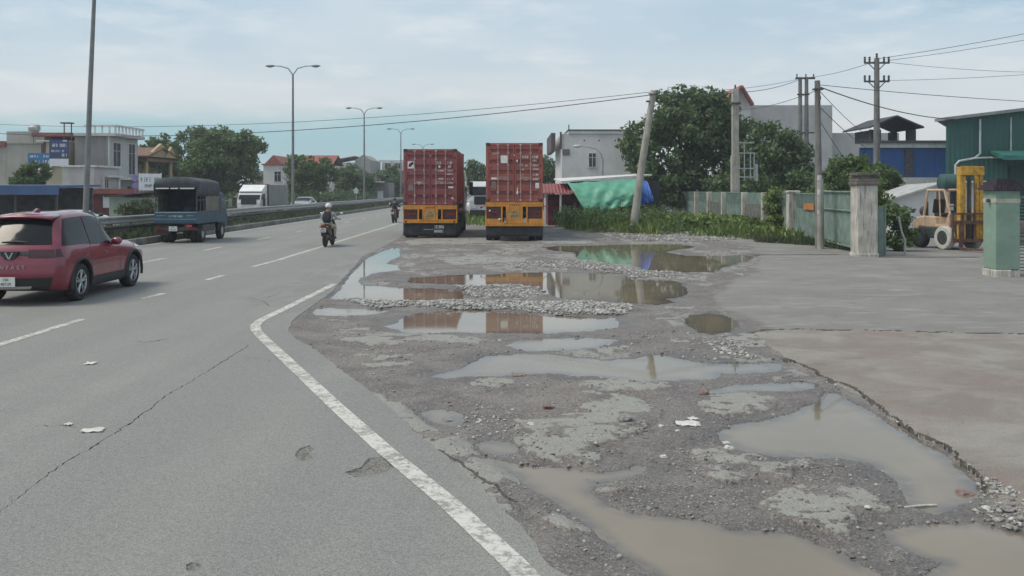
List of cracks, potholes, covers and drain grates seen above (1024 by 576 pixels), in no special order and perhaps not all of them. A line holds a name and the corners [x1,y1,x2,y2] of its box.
pothole [327,246,471,300]
pothole [422,351,788,383]
pothole [186,562,202,571]
pothole [540,243,758,273]
pothole [404,270,697,305]
pothole [415,406,470,427]
pothole [681,311,745,334]
pothole [713,390,985,514]
pothole [346,457,394,478]
pothole [380,309,626,334]
pothole [295,445,314,462]
crack [2,348,245,510]
